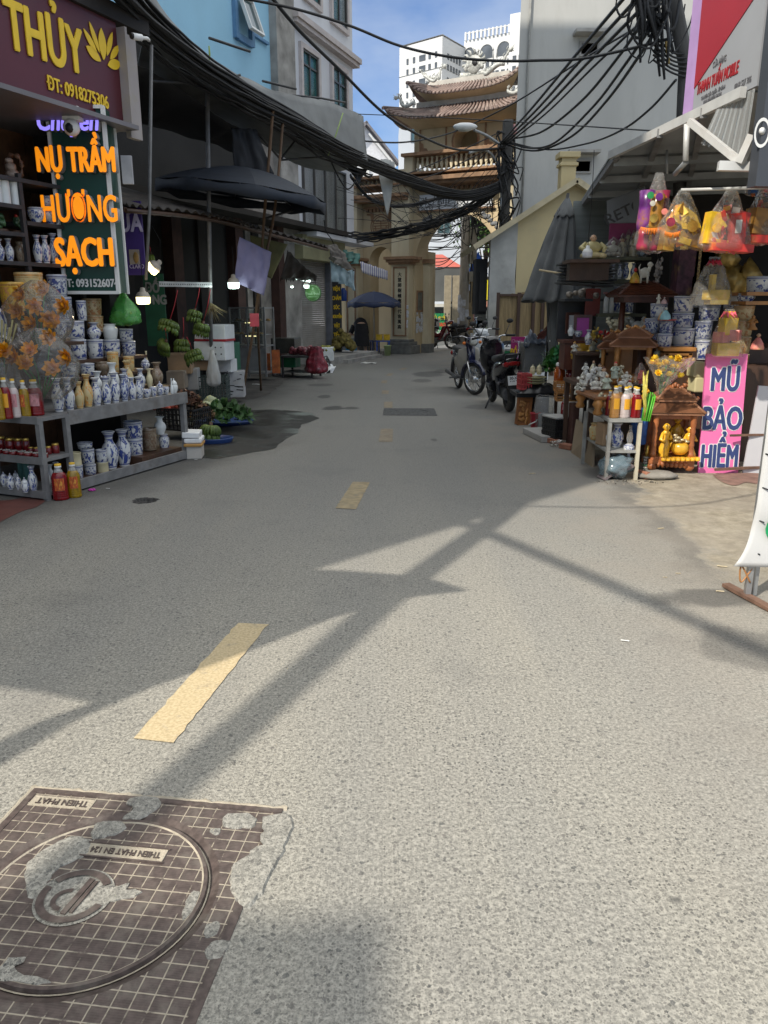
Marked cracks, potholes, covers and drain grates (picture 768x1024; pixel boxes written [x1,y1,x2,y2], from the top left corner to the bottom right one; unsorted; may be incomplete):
manhole cover [0,785,295,1024]
